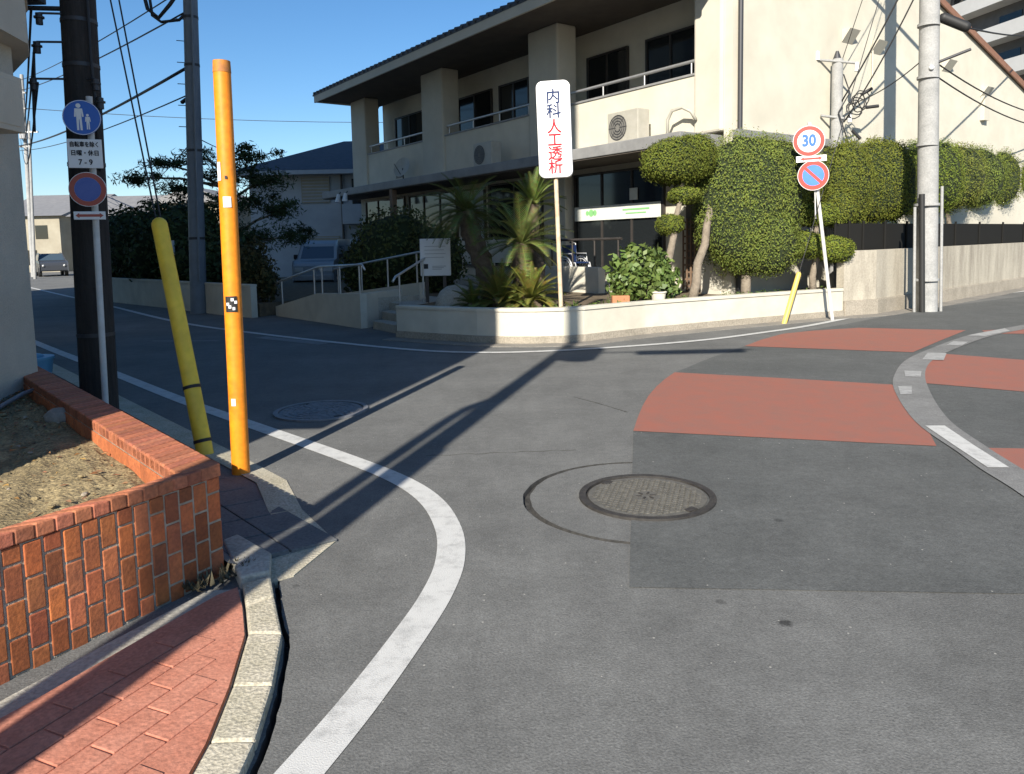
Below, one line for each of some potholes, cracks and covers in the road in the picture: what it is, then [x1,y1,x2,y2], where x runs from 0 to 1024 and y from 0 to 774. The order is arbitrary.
manhole cover [579,474,717,521]
manhole cover [273,400,368,422]
